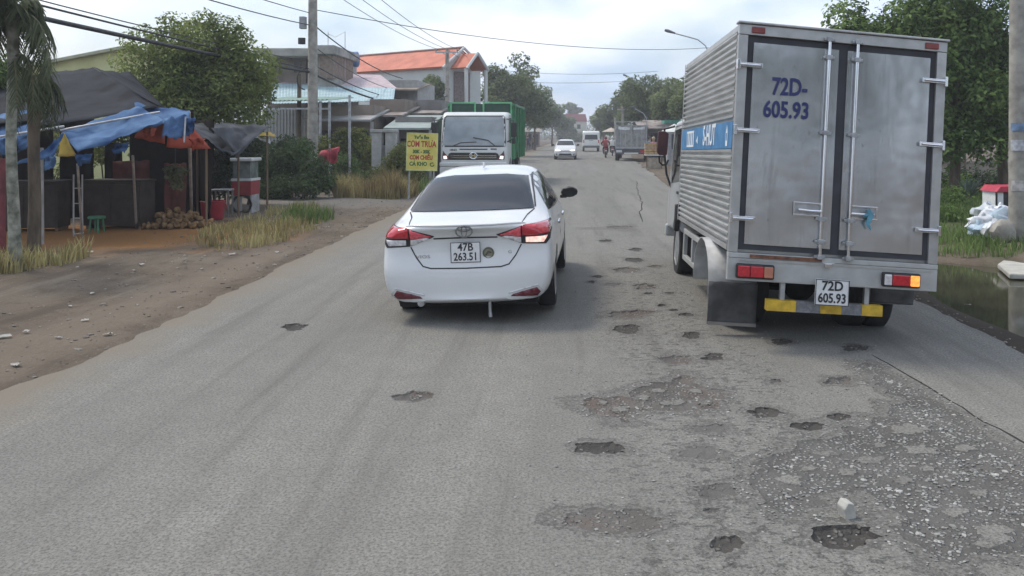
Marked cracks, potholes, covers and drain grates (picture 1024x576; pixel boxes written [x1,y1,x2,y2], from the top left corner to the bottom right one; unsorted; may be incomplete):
pothole [563,507,664,534]
pothole [282,323,308,331]
pothole [583,375,725,423]
pothole [842,344,869,352]
pothole [574,441,626,454]
pothole [709,535,745,554]
pothole [391,390,435,402]
pothole [613,324,640,334]
pothole [749,362,1024,565]
